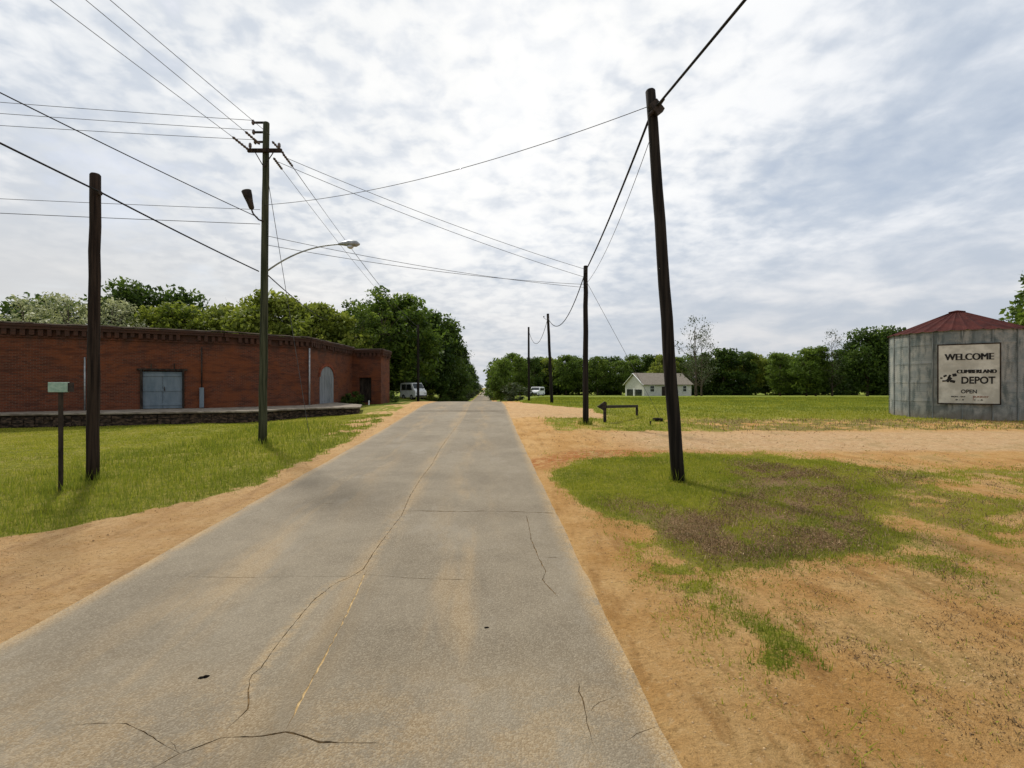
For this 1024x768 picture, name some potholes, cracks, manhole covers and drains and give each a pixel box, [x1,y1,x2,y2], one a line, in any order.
crack [80,423,556,767]
crack [578,685,608,743]
